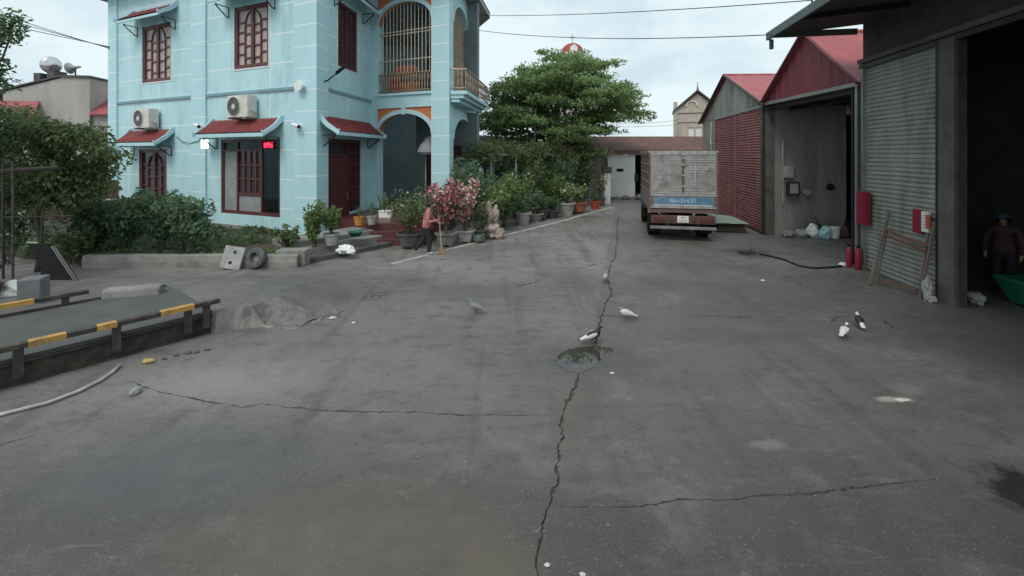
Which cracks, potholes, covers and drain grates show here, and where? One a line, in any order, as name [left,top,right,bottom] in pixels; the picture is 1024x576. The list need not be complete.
crack [124,379,551,416]
crack [558,478,937,508]
crack [829,312,894,328]
